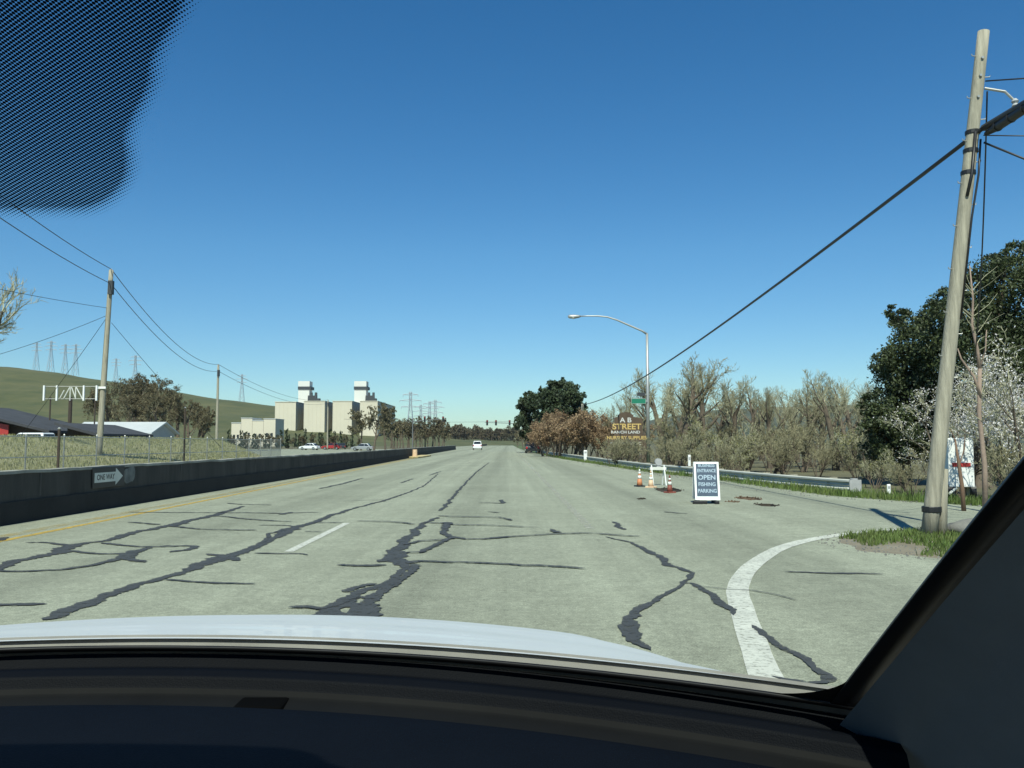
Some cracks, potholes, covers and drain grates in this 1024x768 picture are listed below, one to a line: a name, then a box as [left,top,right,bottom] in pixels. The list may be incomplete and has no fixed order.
crack [605,521,838,683]
crack [166,503,307,514]
